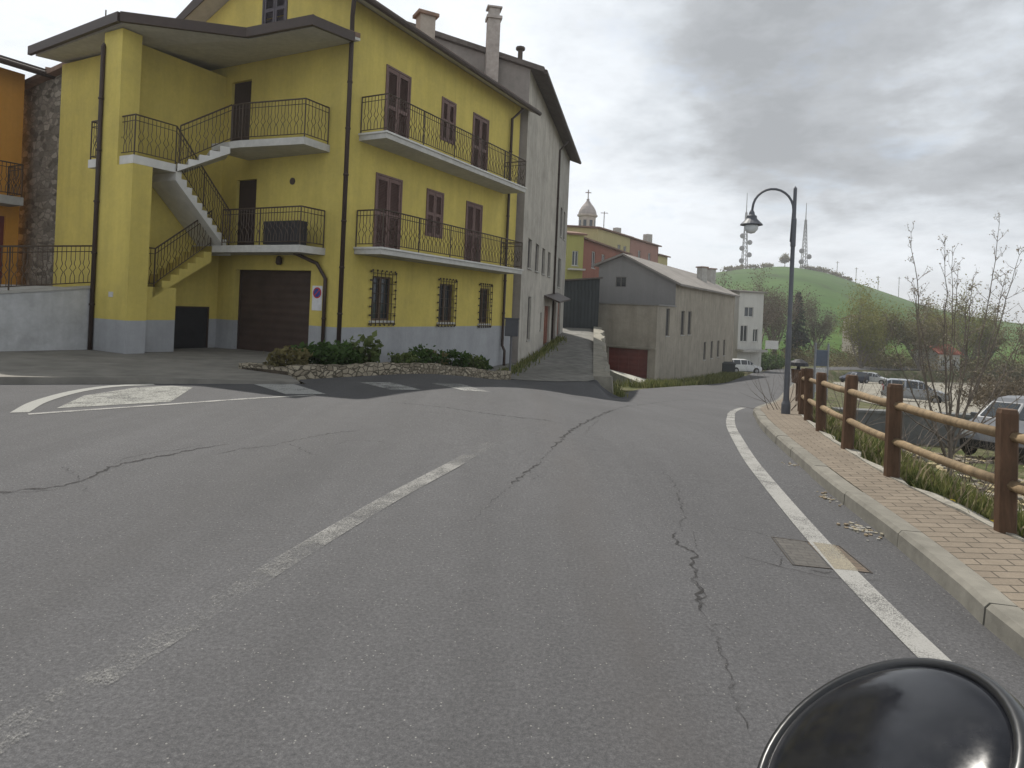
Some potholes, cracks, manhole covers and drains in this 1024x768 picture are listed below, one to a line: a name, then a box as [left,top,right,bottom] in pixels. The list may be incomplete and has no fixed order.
crack [672,533,748,727]
crack [7,445,213,493]
manhole cover [771,536,873,574]
